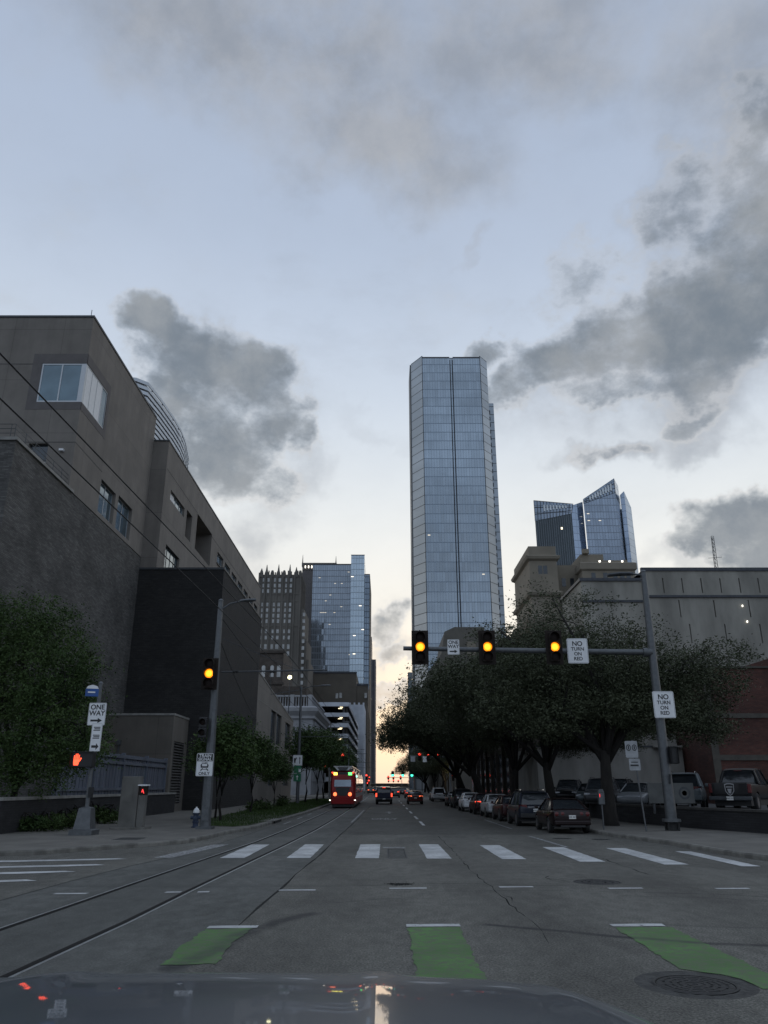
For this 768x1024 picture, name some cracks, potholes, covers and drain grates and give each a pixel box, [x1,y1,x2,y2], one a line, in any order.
manhole cover [634,971,760,1000]
crack [436,836,569,942]
utility cover [387,849,408,859]
